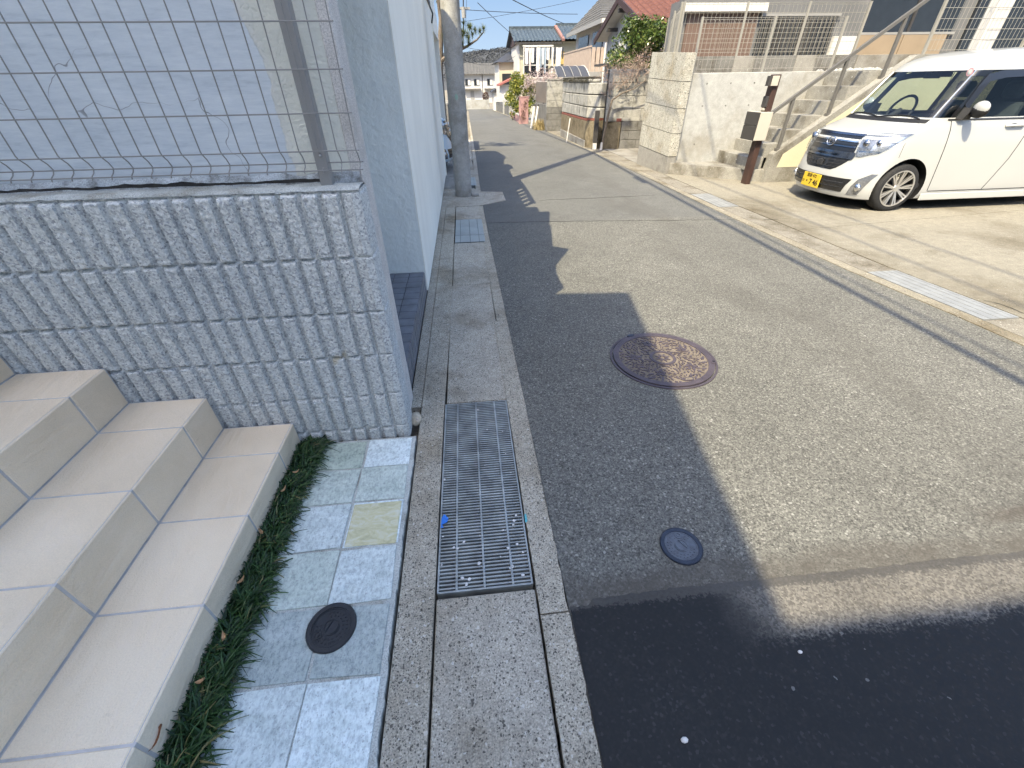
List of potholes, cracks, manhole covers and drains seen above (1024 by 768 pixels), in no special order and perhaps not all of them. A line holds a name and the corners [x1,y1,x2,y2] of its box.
drain grate [437,400,533,600]
drain grate [691,193,739,207]
manhole cover [610,333,718,390]
drain grate [867,270,1019,321]
utility cover [305,602,357,654]
utility cover [660,528,703,566]
